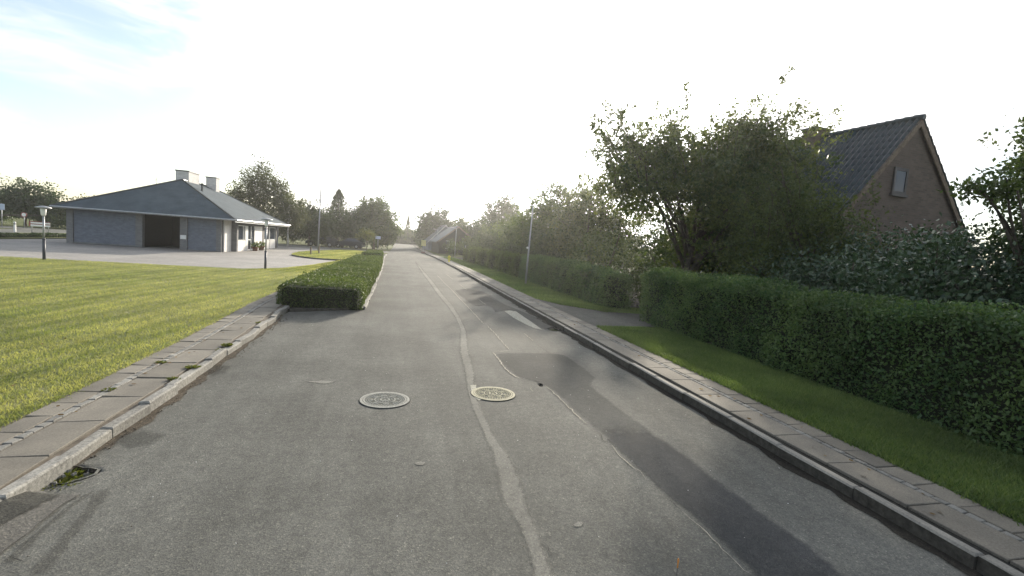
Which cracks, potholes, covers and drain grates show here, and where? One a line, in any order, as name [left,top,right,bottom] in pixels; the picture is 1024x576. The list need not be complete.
manhole cover [470,387,516,402]
manhole cover [359,392,410,409]
